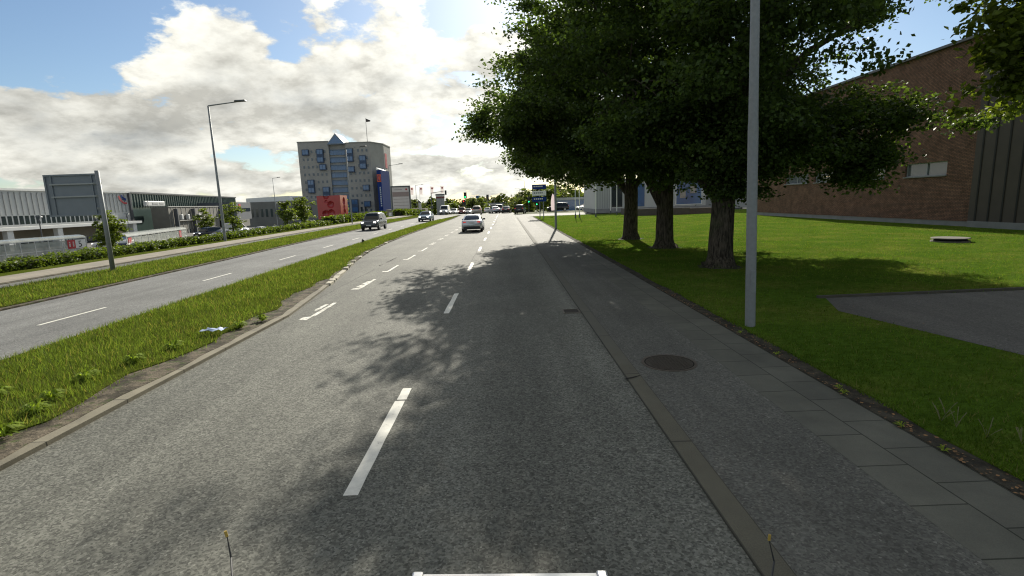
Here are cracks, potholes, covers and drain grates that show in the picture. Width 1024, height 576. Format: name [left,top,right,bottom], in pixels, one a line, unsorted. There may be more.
manhole cover [642,354,697,372]
